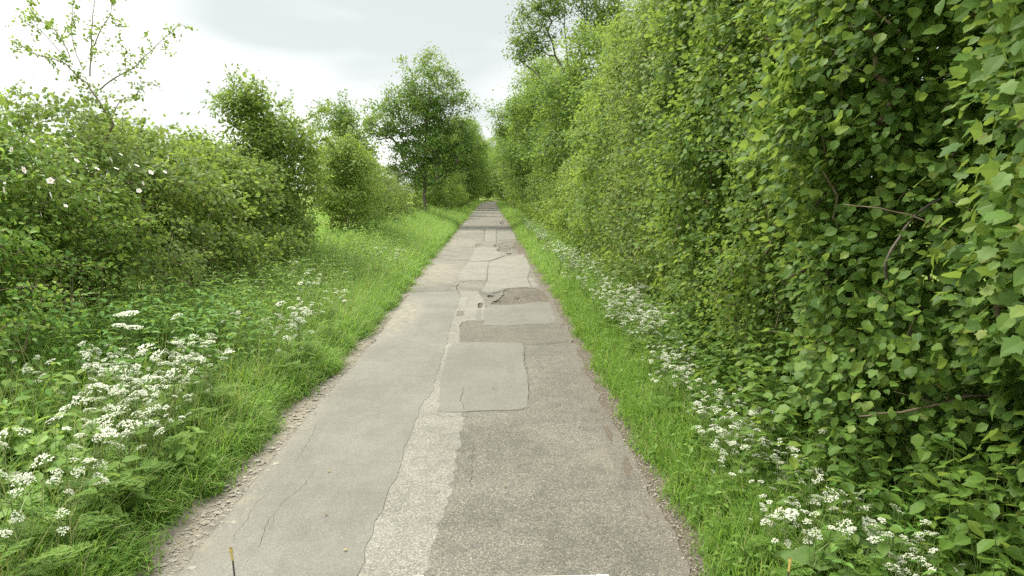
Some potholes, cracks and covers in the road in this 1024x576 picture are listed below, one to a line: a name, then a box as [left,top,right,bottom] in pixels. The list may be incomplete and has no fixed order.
pothole [498,242,518,254]
crack [454,216,508,294]
crack [361,322,530,569]
pothole [492,287,550,305]
